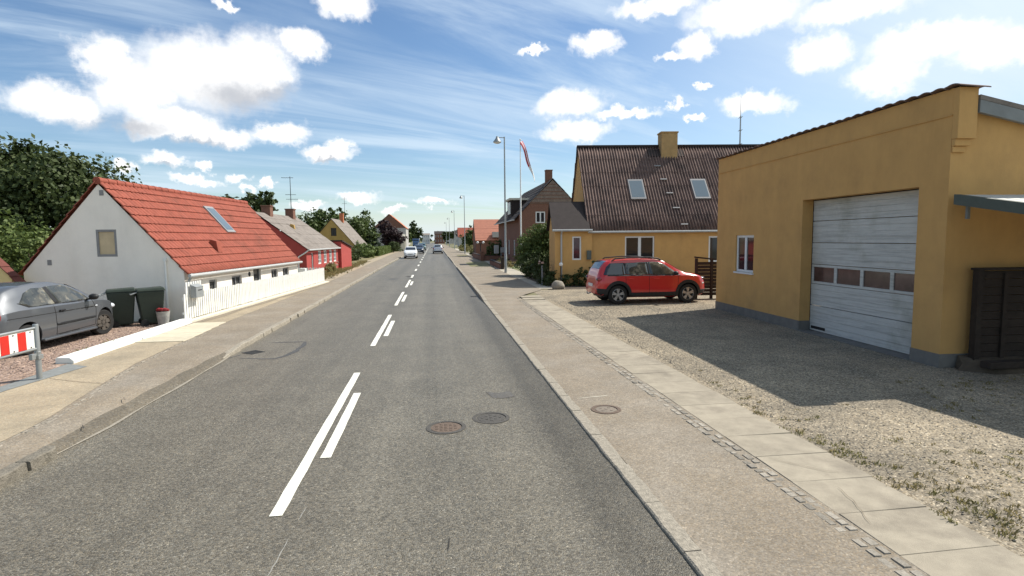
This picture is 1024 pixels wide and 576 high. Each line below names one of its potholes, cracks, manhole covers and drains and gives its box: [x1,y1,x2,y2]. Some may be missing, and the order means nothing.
manhole cover [472,412,510,424]
crack [267,508,306,576]
manhole cover [426,421,466,434]
manhole cover [591,405,621,414]
